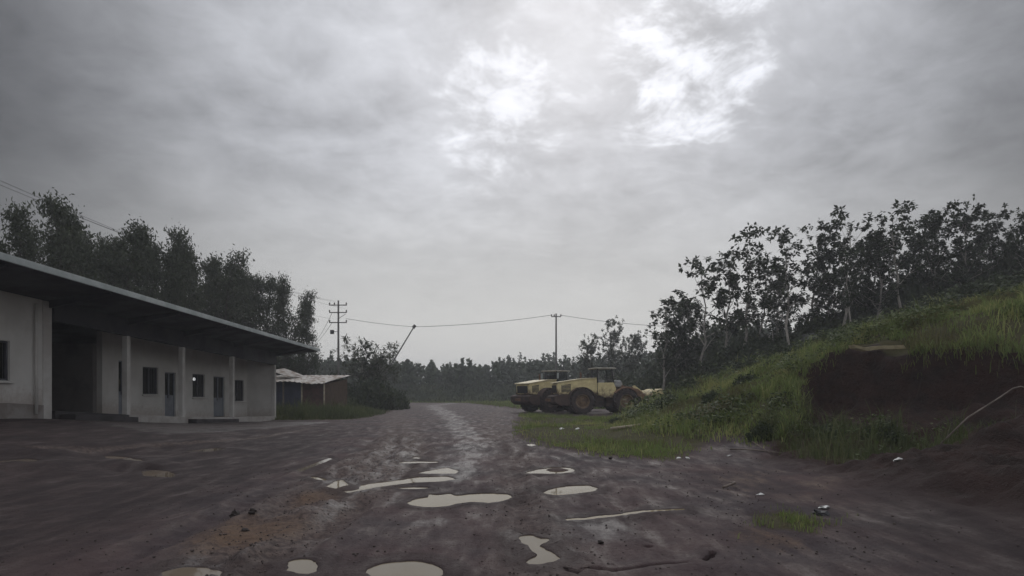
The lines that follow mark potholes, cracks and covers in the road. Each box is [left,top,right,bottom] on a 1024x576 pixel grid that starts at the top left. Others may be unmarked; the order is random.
pothole [315,476,361,491]
pothole [395,489,523,510]
pothole [531,483,608,498]
pothole [502,532,579,572]
crack [542,556,705,576]
pothole [344,554,464,576]
pothole [516,465,584,476]
